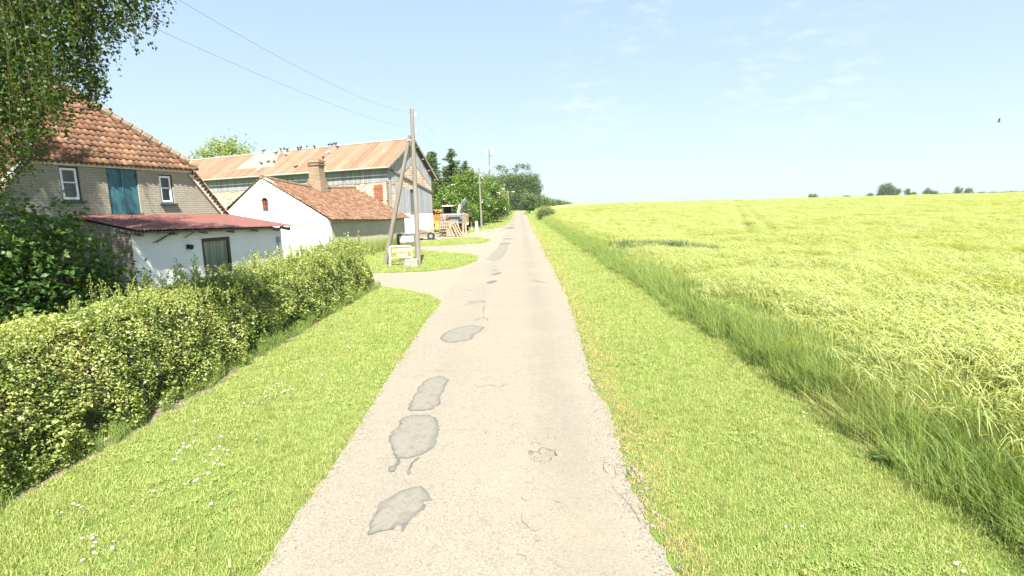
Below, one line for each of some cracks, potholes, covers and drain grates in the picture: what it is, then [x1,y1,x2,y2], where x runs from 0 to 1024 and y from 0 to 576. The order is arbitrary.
pothole [528,446,558,464]
